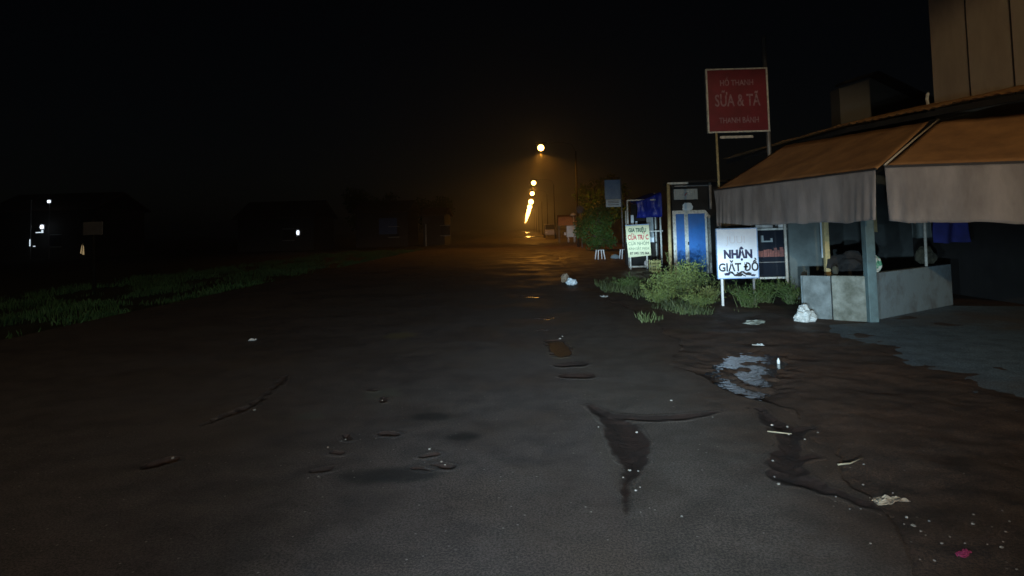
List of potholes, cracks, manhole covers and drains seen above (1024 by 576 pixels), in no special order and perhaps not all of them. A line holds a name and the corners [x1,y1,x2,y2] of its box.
pothole [373,430,407,438]
pothole [133,455,186,472]
pothole [580,404,724,518]
crack [195,374,292,428]
pothole [541,338,578,359]
pothole [413,450,446,460]
pothole [324,449,352,457]
pothole [303,464,341,476]
pothole [424,461,462,472]
pothole [555,372,599,380]
